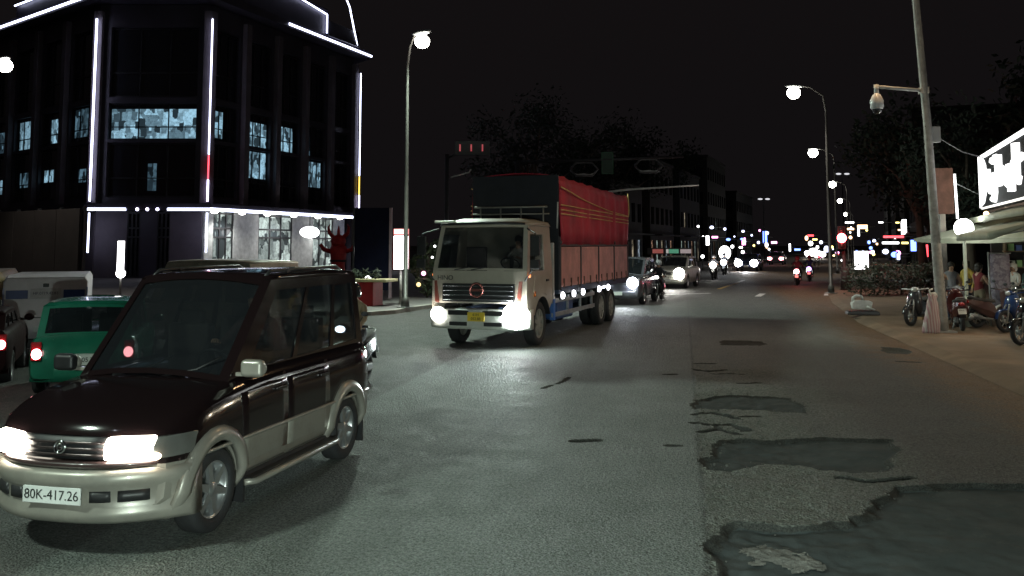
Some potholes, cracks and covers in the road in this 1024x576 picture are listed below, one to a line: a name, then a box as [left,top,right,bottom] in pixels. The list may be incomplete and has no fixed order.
pothole [697,434,903,478]
pothole [699,476,1024,576]
crack [540,377,571,389]
pothole [689,393,812,413]
crack [662,363,763,384]
